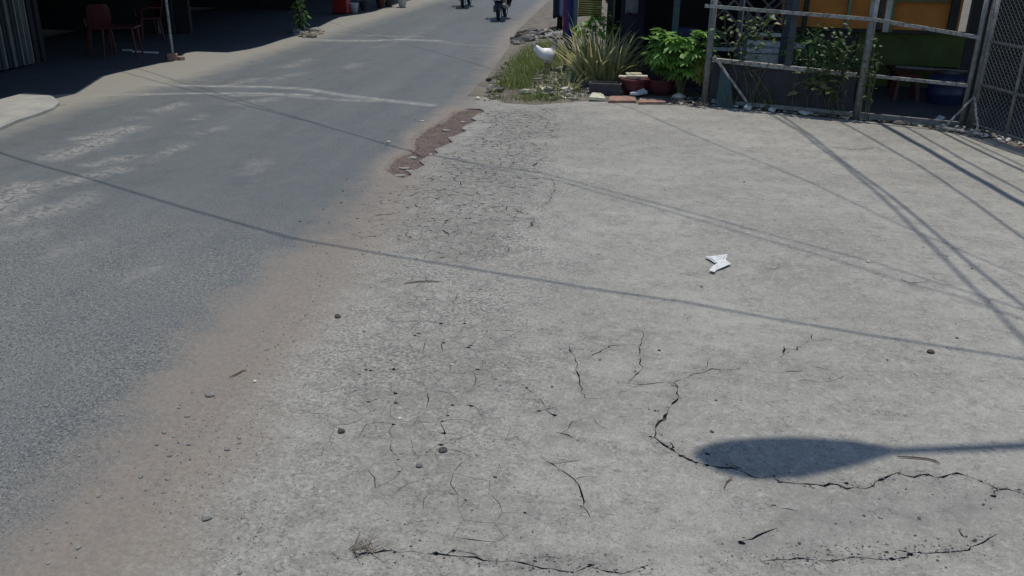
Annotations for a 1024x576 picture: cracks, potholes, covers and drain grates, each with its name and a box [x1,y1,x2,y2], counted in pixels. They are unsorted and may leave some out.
crack [760,531,997,562]
crack [569,329,1024,498]
crack [306,272,648,574]
crack [352,109,561,262]
crack [737,528,777,545]
pothole [384,108,484,178]
